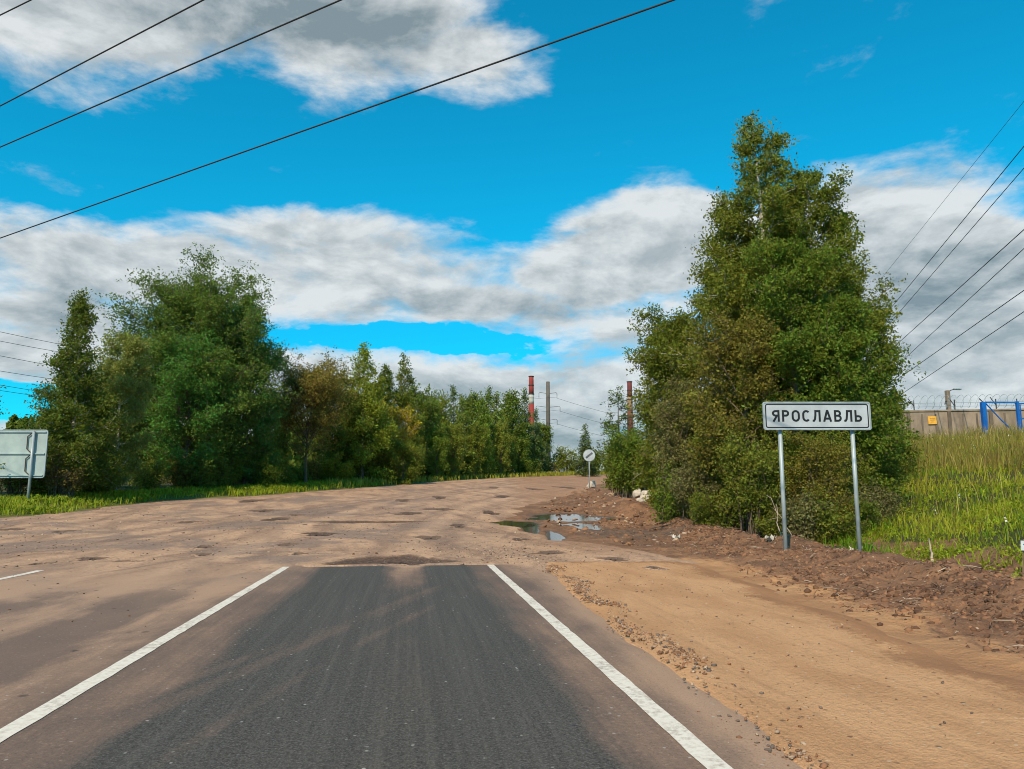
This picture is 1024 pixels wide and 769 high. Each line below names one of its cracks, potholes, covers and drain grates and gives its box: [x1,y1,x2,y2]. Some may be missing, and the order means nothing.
pothole [295,552,488,567]
